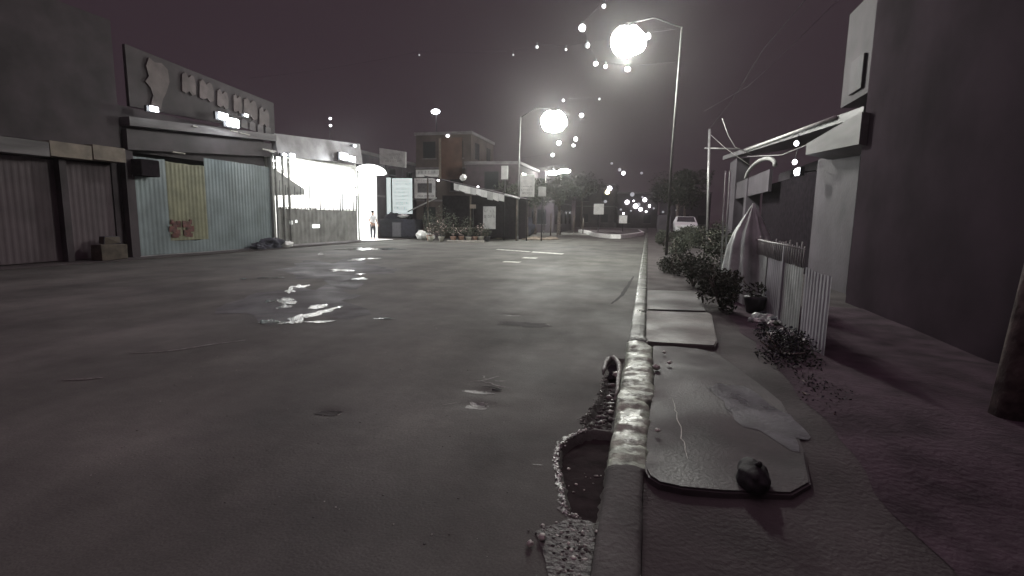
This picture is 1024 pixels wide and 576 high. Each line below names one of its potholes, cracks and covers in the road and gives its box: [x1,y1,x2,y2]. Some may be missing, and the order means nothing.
crack [137,340,242,353]
crack [611,276,634,304]
pothole [577,364,617,430]
pothole [552,428,610,523]
